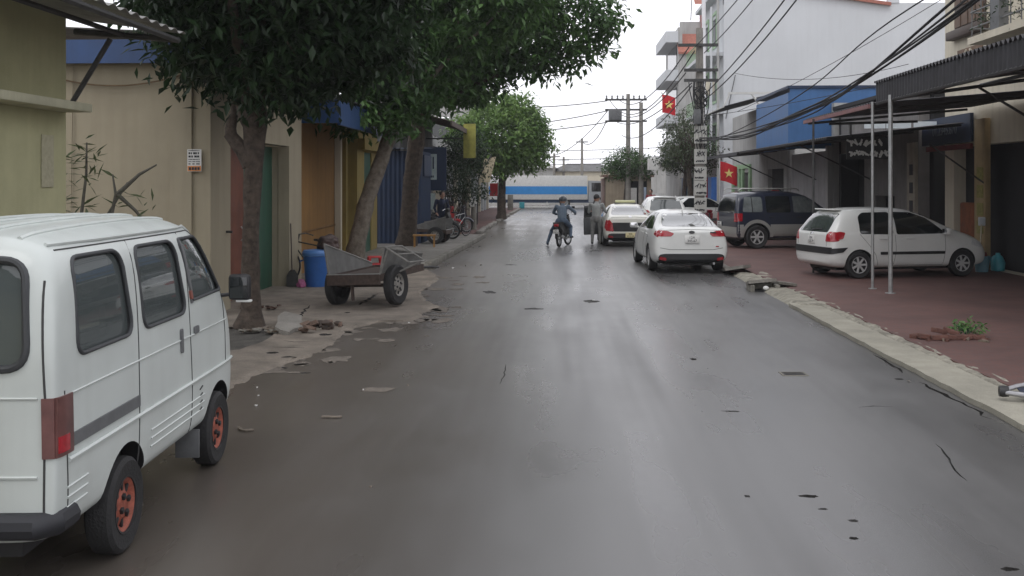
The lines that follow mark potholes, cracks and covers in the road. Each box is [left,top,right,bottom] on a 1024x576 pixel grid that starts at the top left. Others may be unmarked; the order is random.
crack [936,444,967,481]
drain grate [746,283,780,292]
